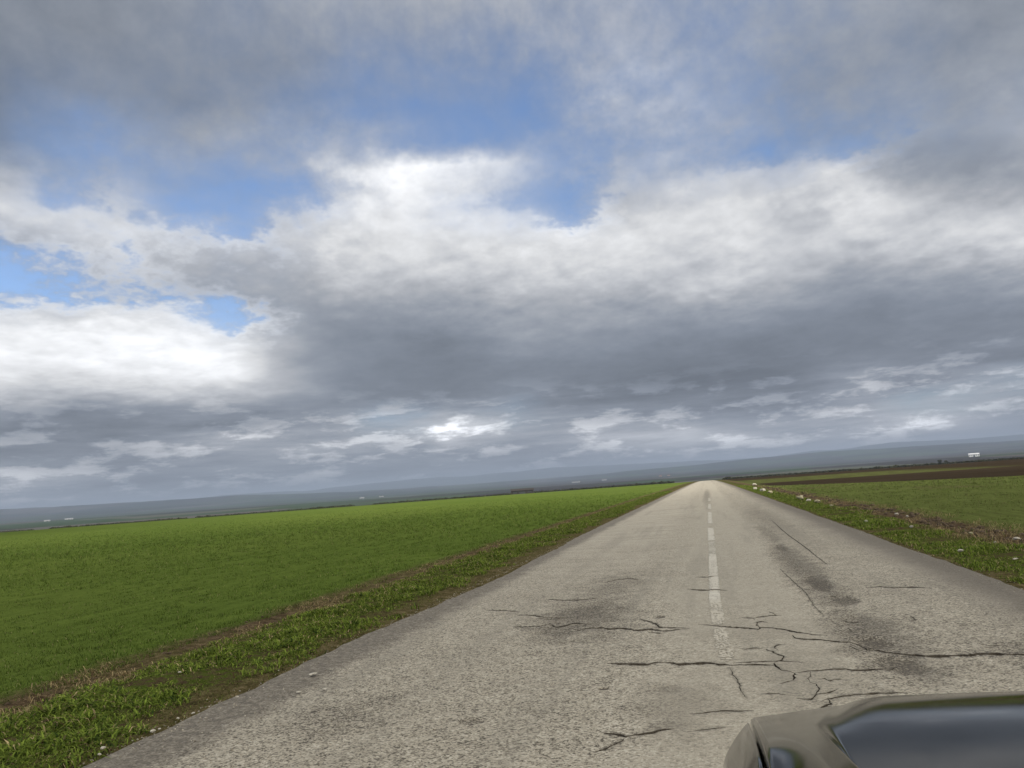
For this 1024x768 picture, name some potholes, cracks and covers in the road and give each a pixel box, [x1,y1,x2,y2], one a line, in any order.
crack [495,578,1024,752]
